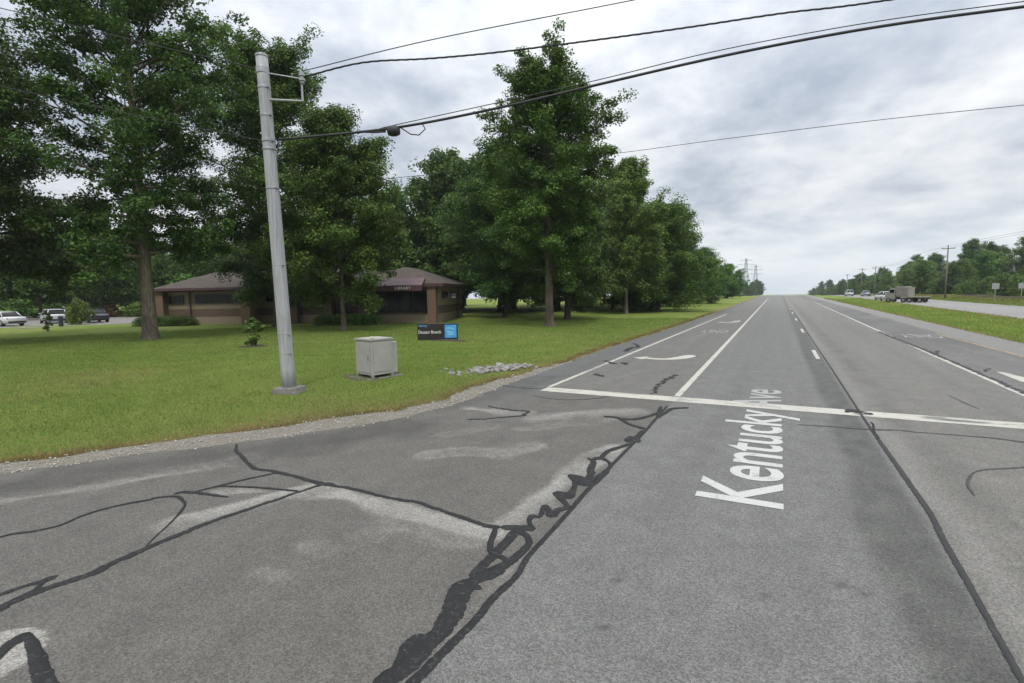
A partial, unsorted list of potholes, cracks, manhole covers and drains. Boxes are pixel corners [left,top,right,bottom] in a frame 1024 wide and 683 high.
crack [649,375,678,394]
